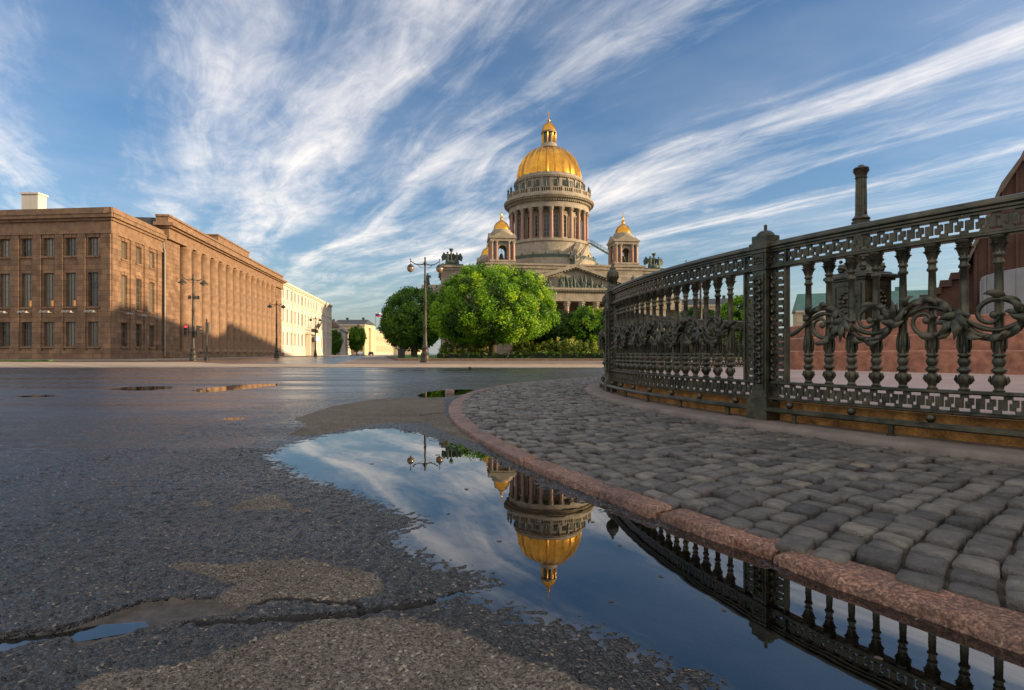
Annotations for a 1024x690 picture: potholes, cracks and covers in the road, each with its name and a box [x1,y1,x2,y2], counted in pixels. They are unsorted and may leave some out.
crack [190,591,454,626]
